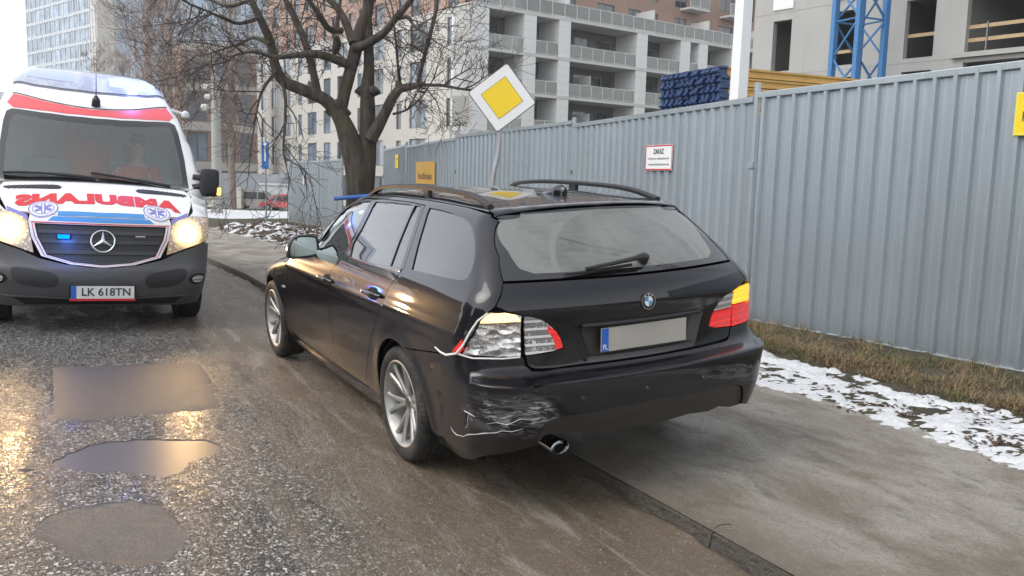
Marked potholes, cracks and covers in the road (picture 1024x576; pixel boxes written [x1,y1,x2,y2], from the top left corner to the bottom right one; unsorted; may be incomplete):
pothole [52,439,222,478]
